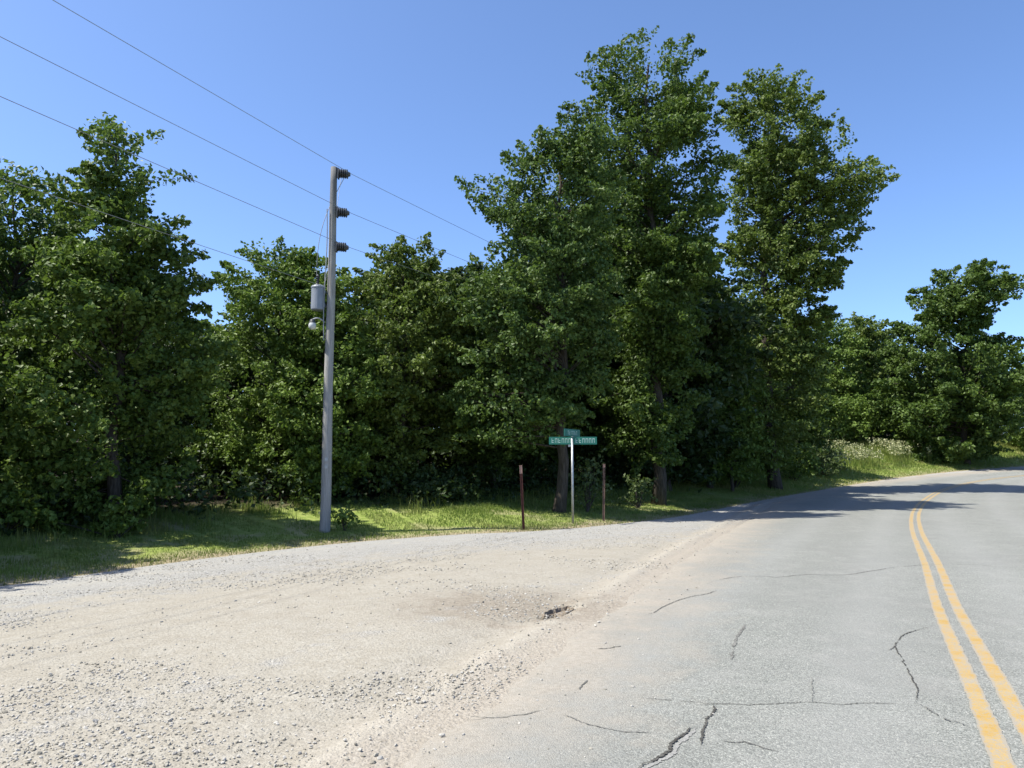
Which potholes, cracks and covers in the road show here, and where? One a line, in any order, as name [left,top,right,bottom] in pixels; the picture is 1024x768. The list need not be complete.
pothole [542,605,574,620]
crack [653,564,1004,613]
crack [566,627,965,768]
